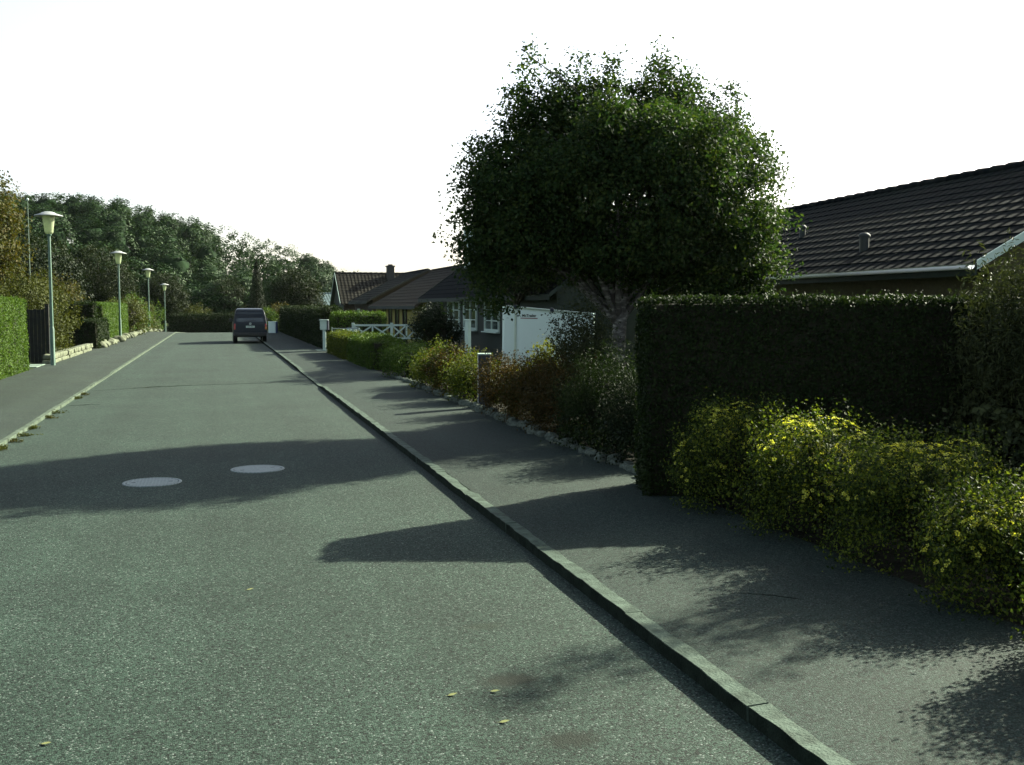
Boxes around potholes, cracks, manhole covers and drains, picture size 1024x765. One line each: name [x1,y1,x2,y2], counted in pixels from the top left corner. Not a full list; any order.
manhole cover [122,477,182,487]
manhole cover [230,465,285,473]
